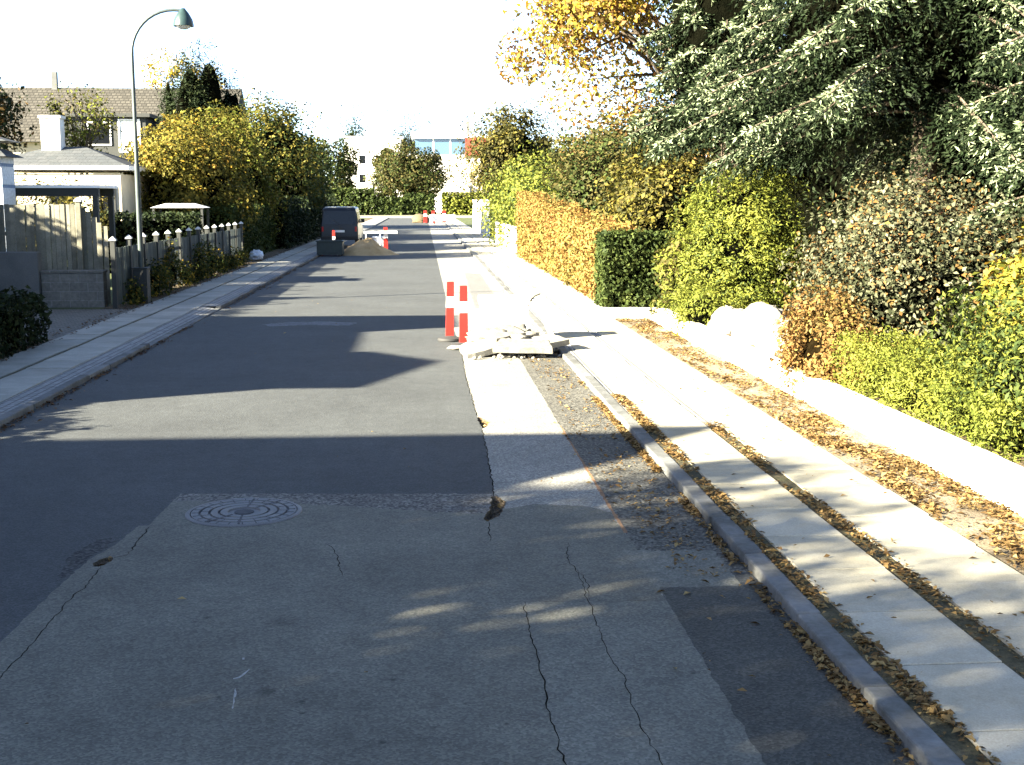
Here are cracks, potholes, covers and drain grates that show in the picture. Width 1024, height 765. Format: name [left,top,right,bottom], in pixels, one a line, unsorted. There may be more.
pothole [484,496,506,521]
crack [523,543,663,765]
manhole cover [185,498,302,527]
